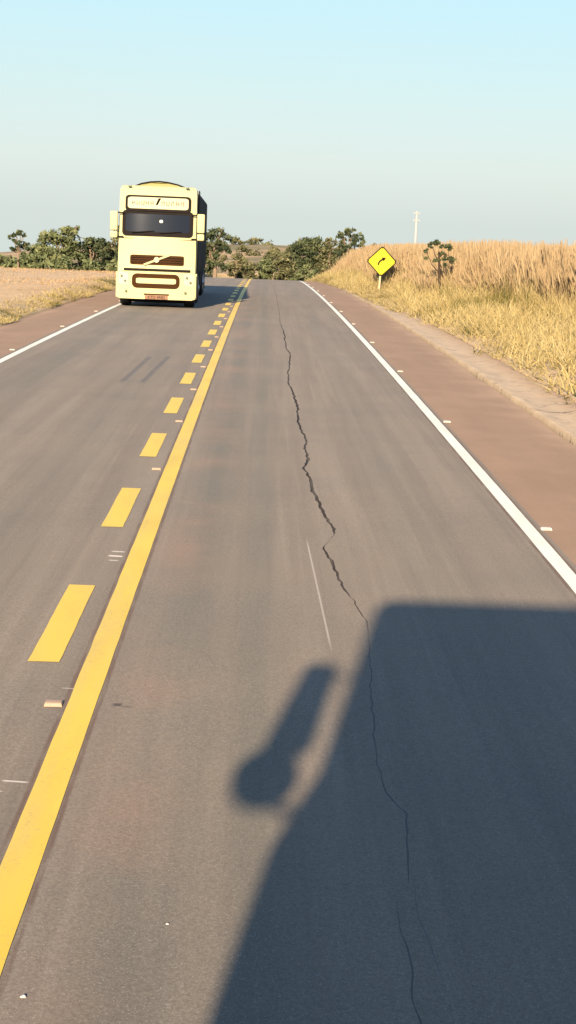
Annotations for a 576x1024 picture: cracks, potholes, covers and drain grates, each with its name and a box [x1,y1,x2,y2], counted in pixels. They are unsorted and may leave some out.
crack [274,290,442,1024]
